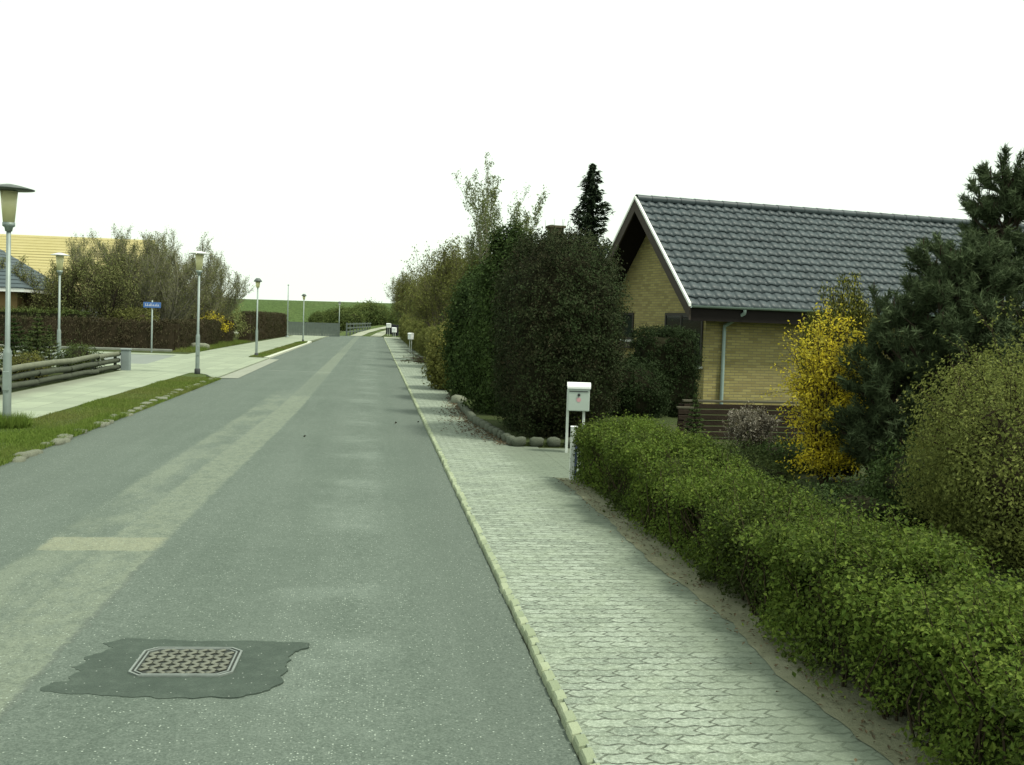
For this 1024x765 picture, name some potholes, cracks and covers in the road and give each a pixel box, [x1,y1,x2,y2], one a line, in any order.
manhole cover [128,647,243,677]
